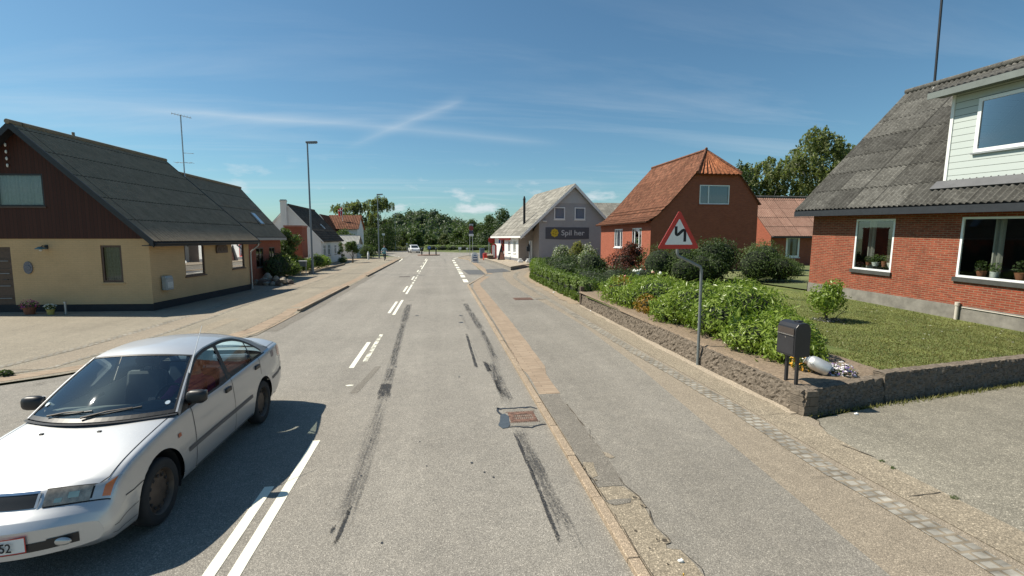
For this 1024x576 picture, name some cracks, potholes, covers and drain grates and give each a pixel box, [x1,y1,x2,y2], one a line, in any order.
drain grate [506,410,540,423]
crack [619,477,705,576]
